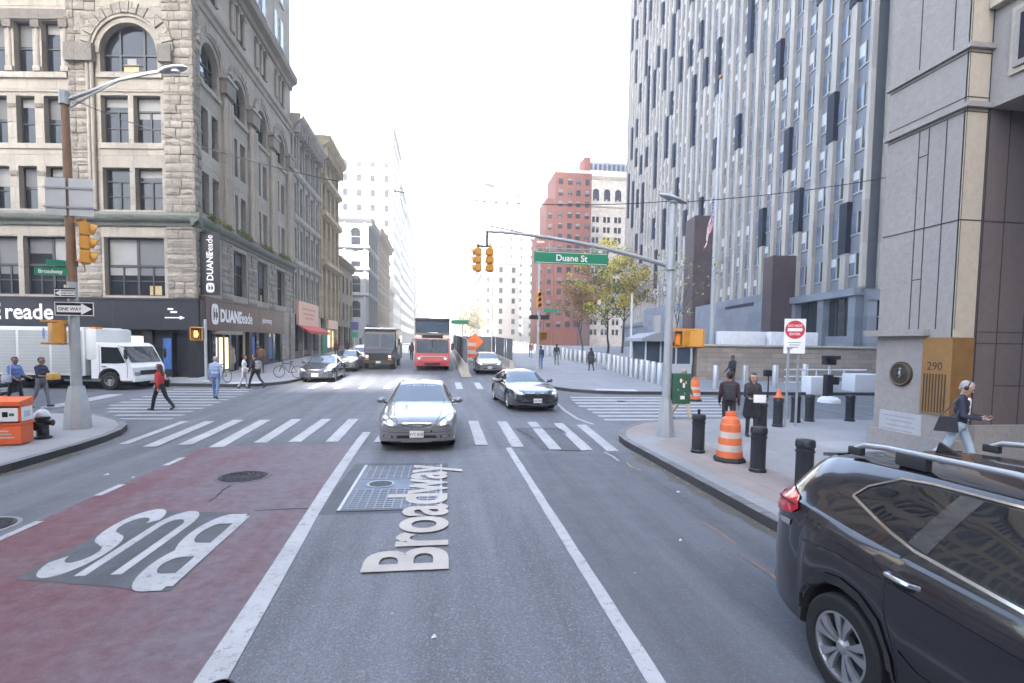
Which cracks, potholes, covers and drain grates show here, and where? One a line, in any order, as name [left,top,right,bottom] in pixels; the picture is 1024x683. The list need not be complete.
manhole cover [0,516,23,531]
manhole cover [214,470,271,484]
drain grate [318,463,448,515]
